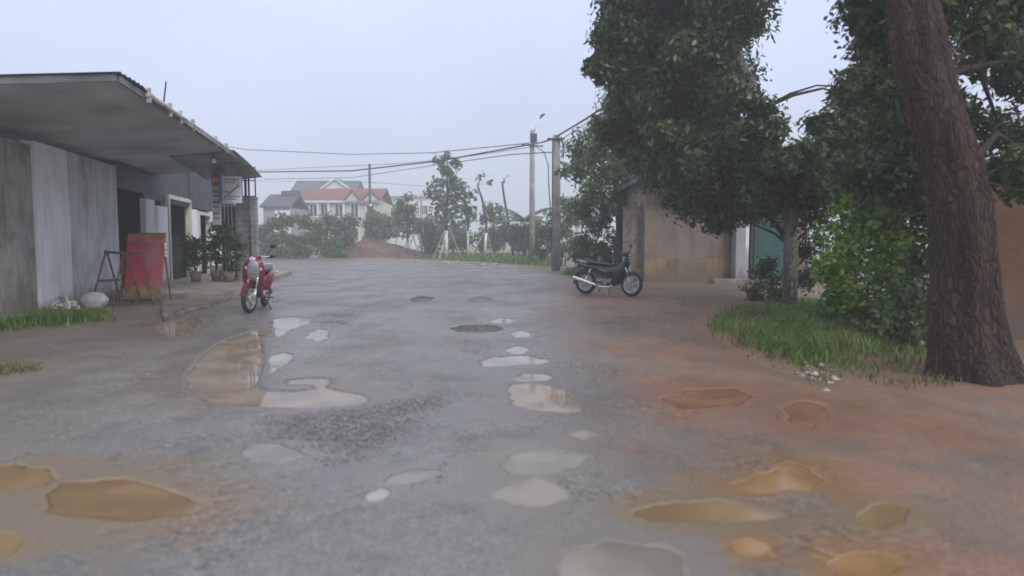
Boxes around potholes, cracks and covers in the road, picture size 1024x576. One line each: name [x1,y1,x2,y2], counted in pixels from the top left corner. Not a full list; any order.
pothole [495,450,591,477]
pothole [728,461,830,495]
pothole [0,532,24,560]
pothole [729,538,772,557]
pothole [0,463,62,491]
pothole [382,469,443,485]
pothole [38,476,215,523]
pothole [630,498,787,524]
pothole [777,399,836,430]
pothole [183,329,372,409]
pothole [485,475,573,508]
pothole [506,383,583,413]
